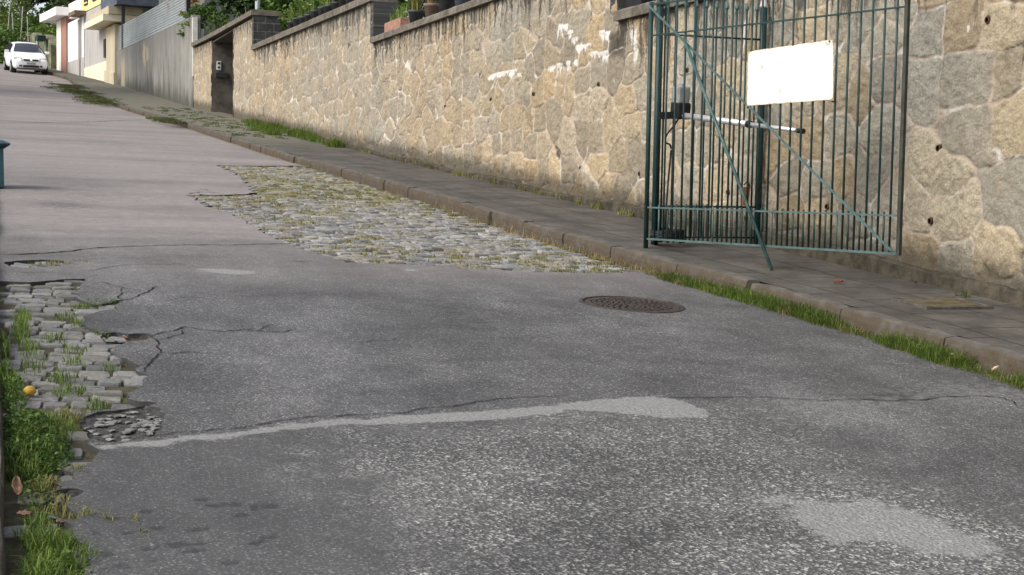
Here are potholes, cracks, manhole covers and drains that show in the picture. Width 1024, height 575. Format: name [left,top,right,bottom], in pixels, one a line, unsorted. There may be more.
crack [26,243,292,261]
pothole [80,406,165,442]
crack [133,324,292,371]
pothole [100,334,151,345]
crack [161,395,559,435]
manhole cover [578,296,685,313]
crack [680,395,1016,404]
